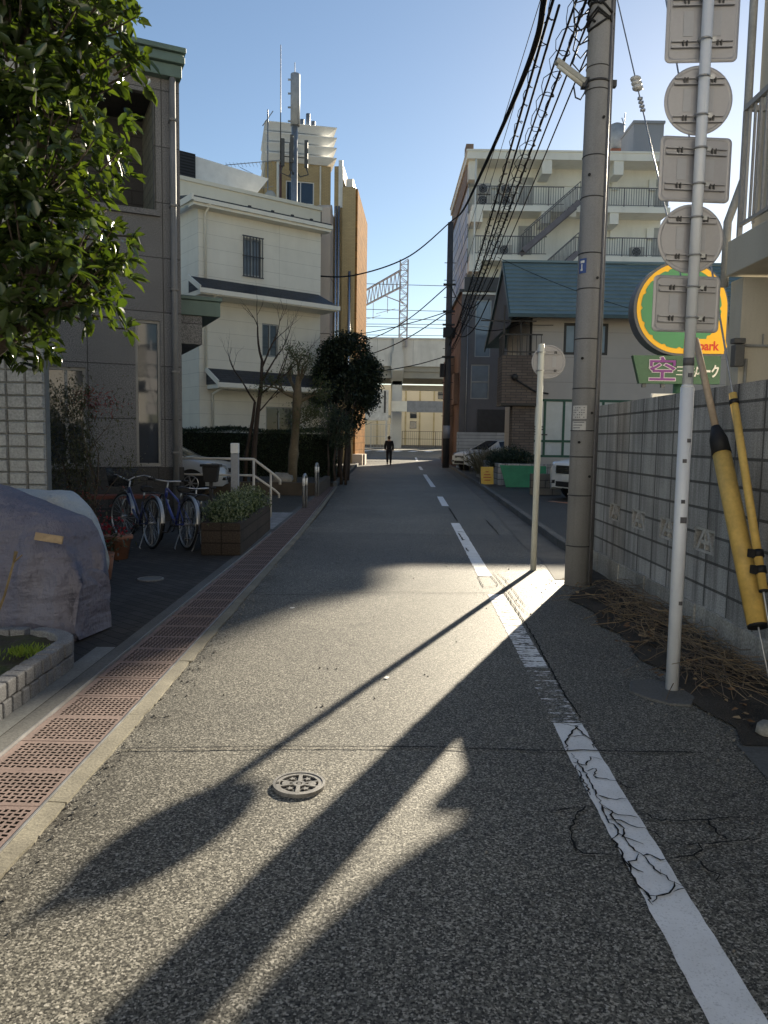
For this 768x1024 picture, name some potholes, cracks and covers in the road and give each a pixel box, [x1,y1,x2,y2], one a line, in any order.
manhole cover [273,771,325,798]
crack [557,722,760,905]
